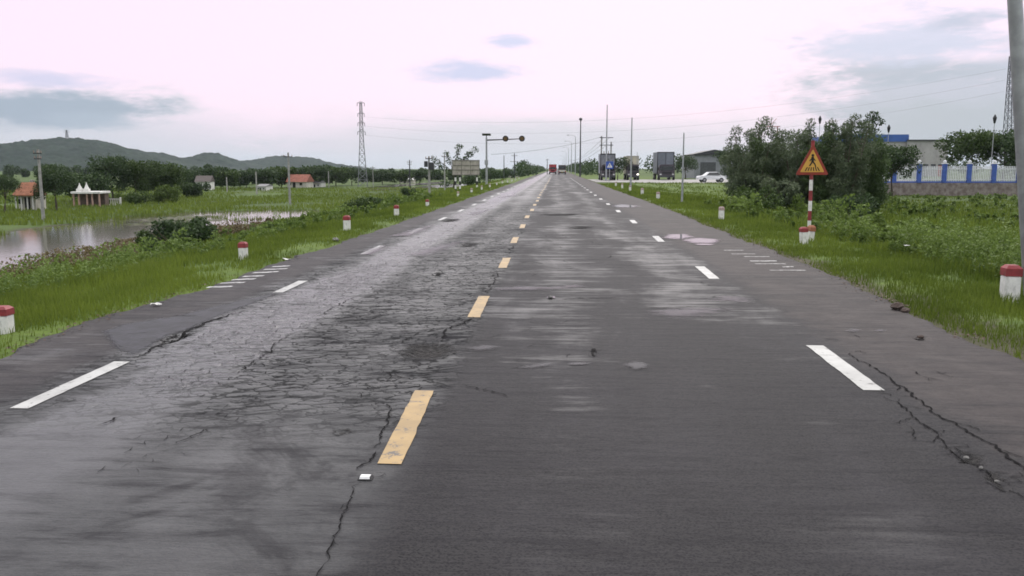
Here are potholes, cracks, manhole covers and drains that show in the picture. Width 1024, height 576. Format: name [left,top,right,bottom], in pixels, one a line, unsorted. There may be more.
crack [99,192,616,477]
crack [827,335,1024,497]
